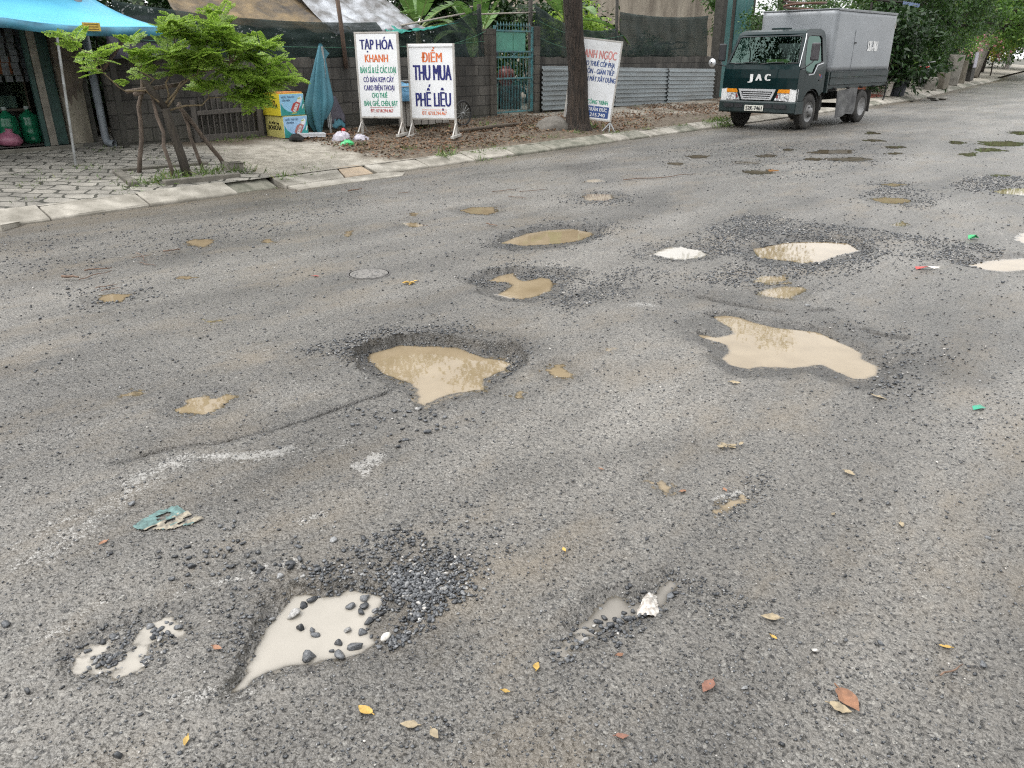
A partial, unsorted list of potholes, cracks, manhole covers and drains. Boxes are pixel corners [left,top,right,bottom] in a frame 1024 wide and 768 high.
pothole [214,576,417,710]
pothole [49,598,209,691]
pothole [560,564,694,642]
pothole [683,310,906,391]
pothole [485,223,607,250]
pothole [462,265,574,304]
pothole [946,251,1024,274]
manhole cover [347,268,391,279]
pothole [346,331,536,416]
pothole [734,232,878,269]
crack [93,388,394,472]
